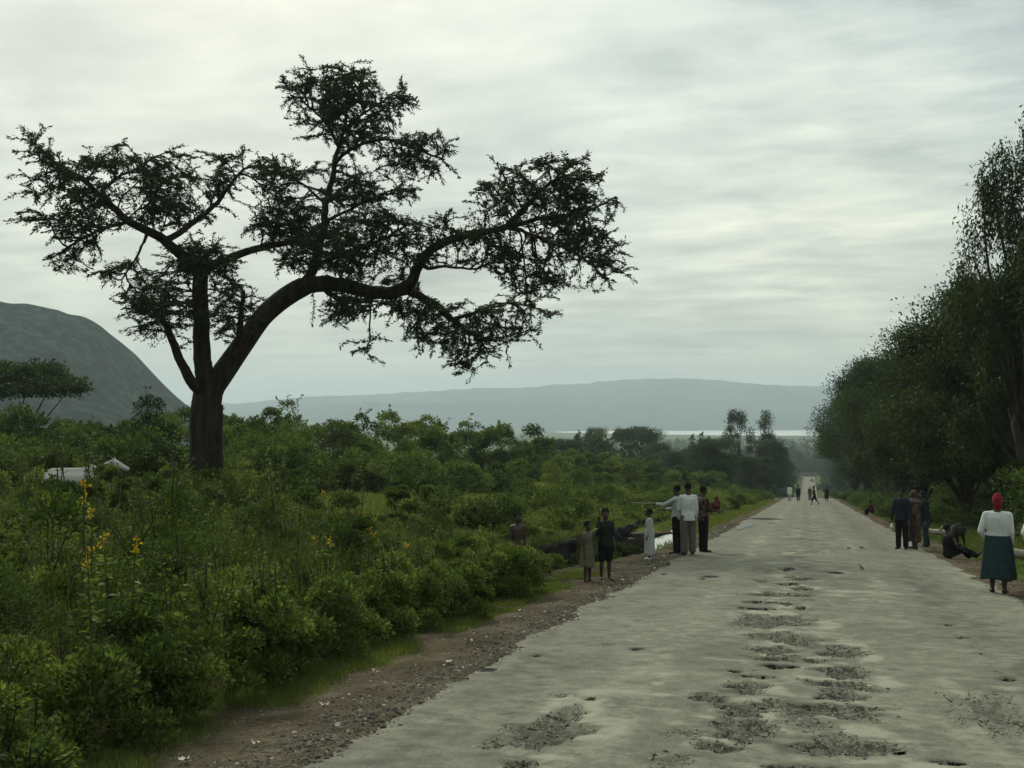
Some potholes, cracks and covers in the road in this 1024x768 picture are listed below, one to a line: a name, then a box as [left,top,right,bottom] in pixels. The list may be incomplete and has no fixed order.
pothole [804,664,875,680]
pothole [795,677,890,693]
pothole [740,631,833,646]
pothole [689,693,730,703]
pothole [809,645,873,660]
pothole [741,645,797,656]
pothole [710,699,780,720]
pothole [689,739,754,754]
pothole [784,731,913,760]
pothole [740,654,834,664]
pothole [465,703,601,760]
pothole [817,687,872,702]
